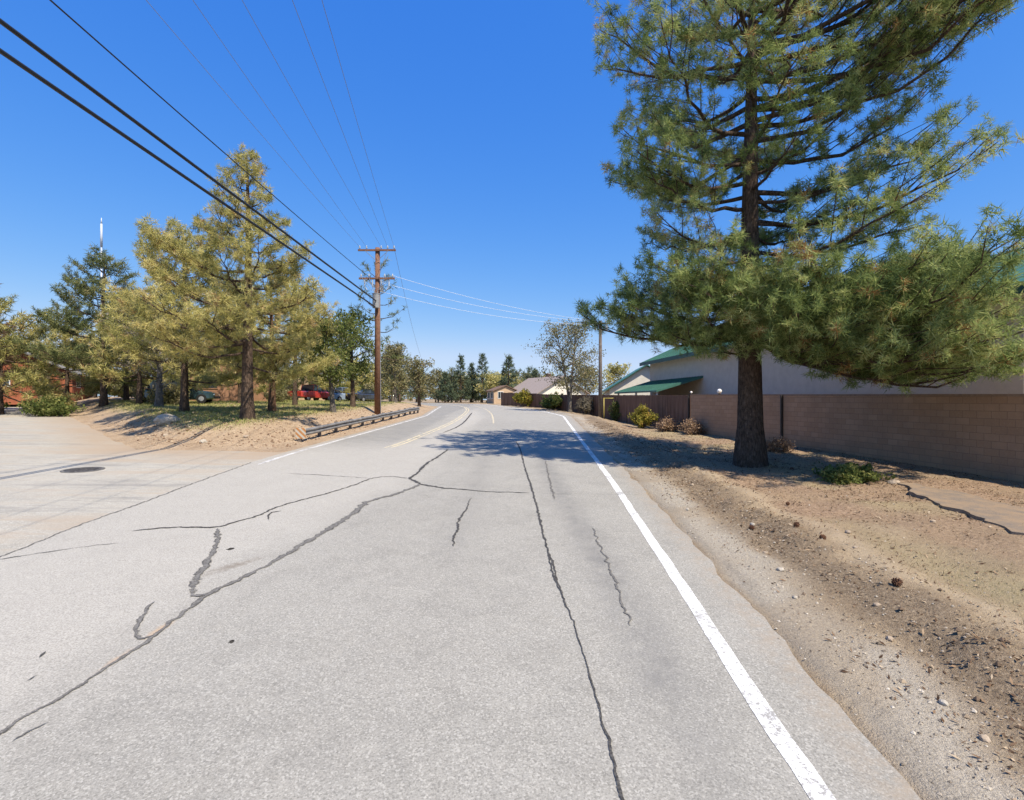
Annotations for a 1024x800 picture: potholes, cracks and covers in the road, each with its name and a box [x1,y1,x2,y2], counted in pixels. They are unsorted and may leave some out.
crack [452,499,470,546]
crack [516,442,632,800]
